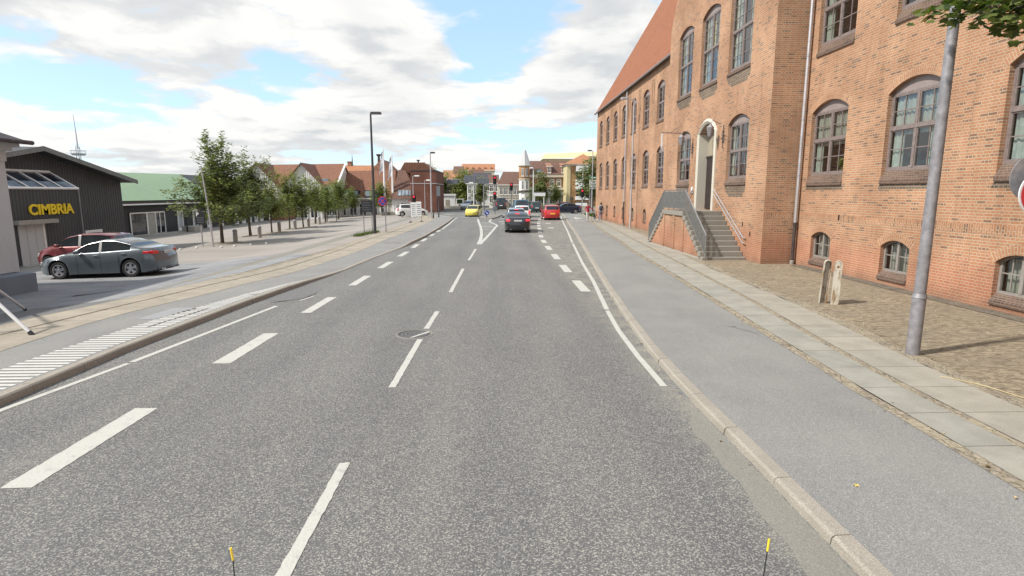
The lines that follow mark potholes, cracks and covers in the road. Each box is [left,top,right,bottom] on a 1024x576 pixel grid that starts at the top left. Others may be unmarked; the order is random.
manhole cover [395,330,434,339]
